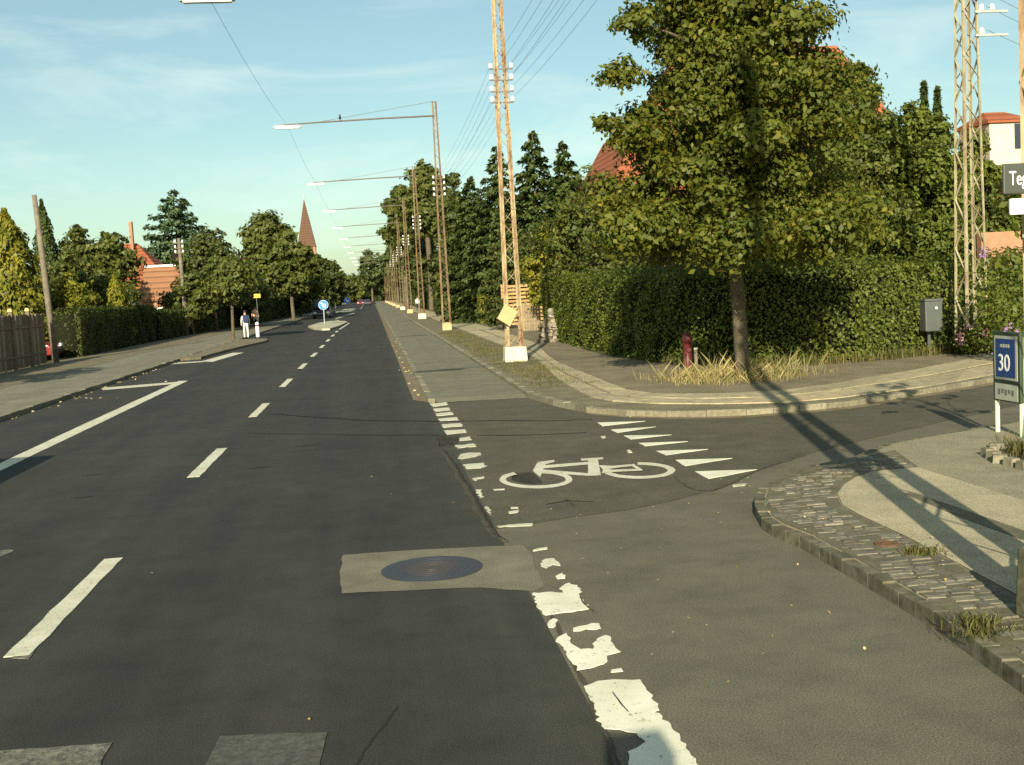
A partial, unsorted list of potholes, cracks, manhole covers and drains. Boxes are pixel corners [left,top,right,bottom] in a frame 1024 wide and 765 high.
crack [355,706,398,765]
manhole cover [340,545,544,593]
